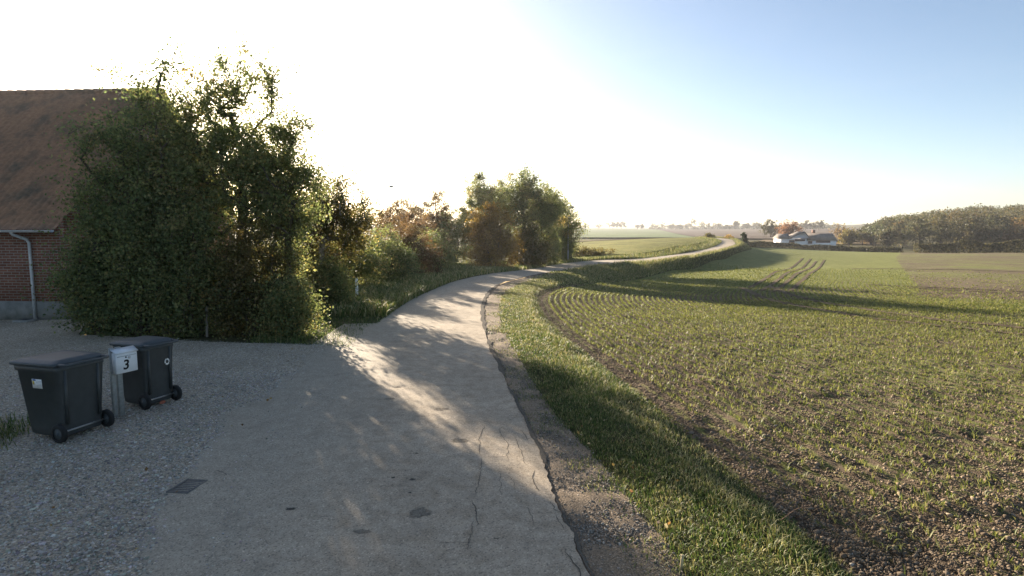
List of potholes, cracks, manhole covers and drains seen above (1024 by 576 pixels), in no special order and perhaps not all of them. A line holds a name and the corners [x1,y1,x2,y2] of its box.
crack [440,273,595,576]
drain grate [166,478,208,494]
